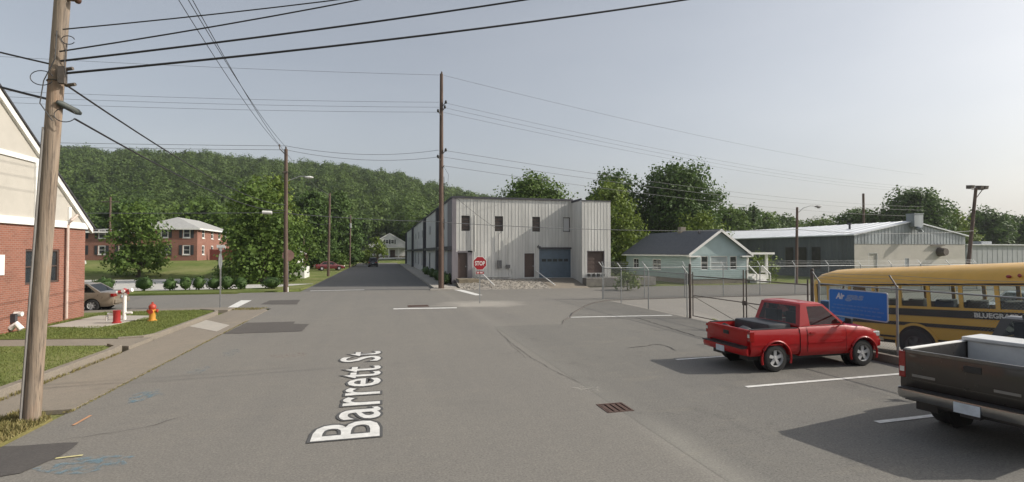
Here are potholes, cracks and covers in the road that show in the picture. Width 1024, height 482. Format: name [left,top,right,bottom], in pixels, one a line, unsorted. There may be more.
drain grate [596,402,634,413]
